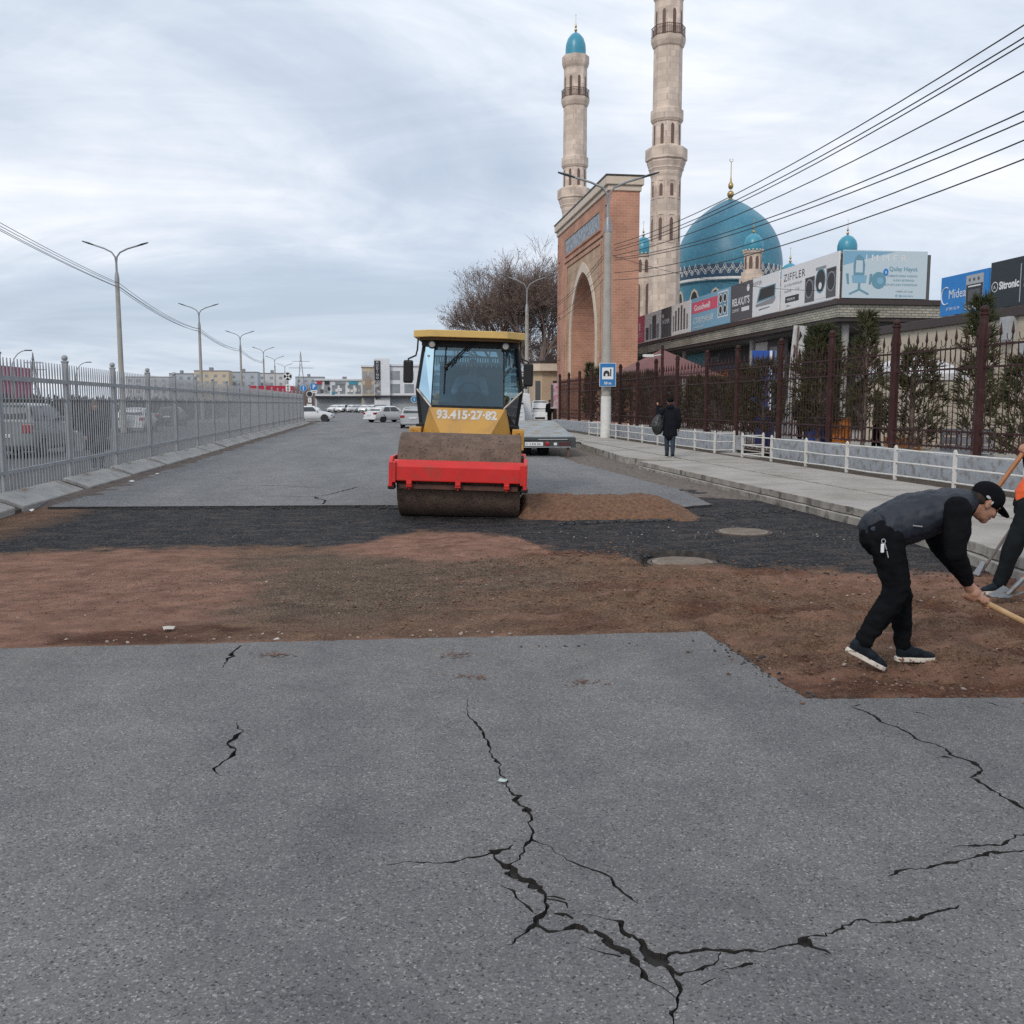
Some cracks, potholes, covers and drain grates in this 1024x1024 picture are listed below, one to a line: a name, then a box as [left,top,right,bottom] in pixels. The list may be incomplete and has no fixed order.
crack [223,645,242,668]
crack [250,485,356,504]
crack [888,833,1024,876]
crack [212,723,244,776]
manhole cover [647,556,718,566]
crack [851,704,1024,809]
crack [387,700,959,1024]
manhole cover [715,527,773,537]
